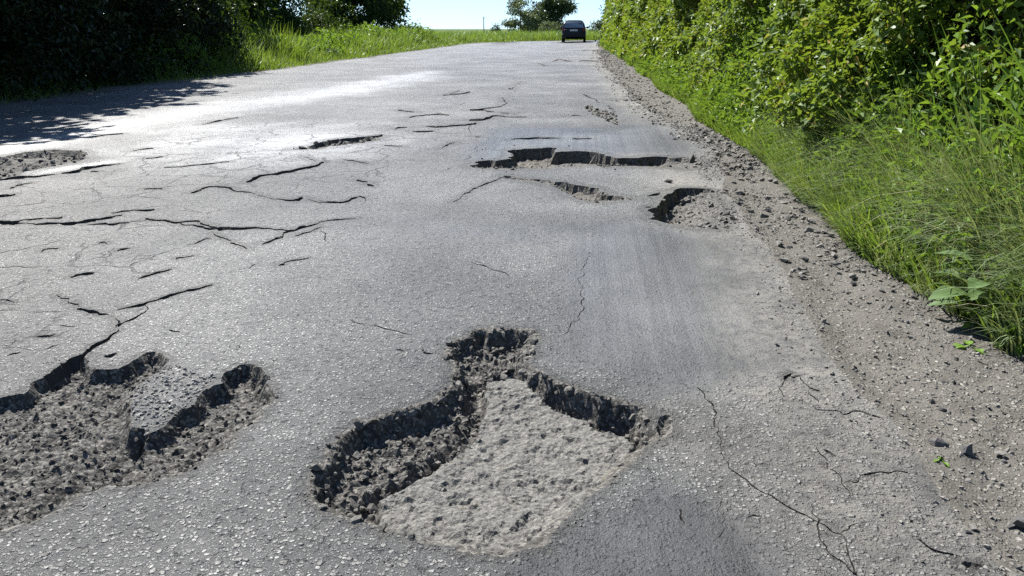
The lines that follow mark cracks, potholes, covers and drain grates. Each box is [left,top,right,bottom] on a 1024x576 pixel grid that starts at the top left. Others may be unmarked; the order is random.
crack [0,157,374,387]
pothole [293,134,383,150]
pothole [656,413,673,439]
pothole [469,147,702,170]
pothole [306,325,660,557]
crack [779,373,880,418]
crack [0,133,229,197]
crack [453,176,503,202]
crack [697,387,910,576]
crack [565,252,591,334]
pothole [0,150,89,179]
crack [384,81,592,148]
